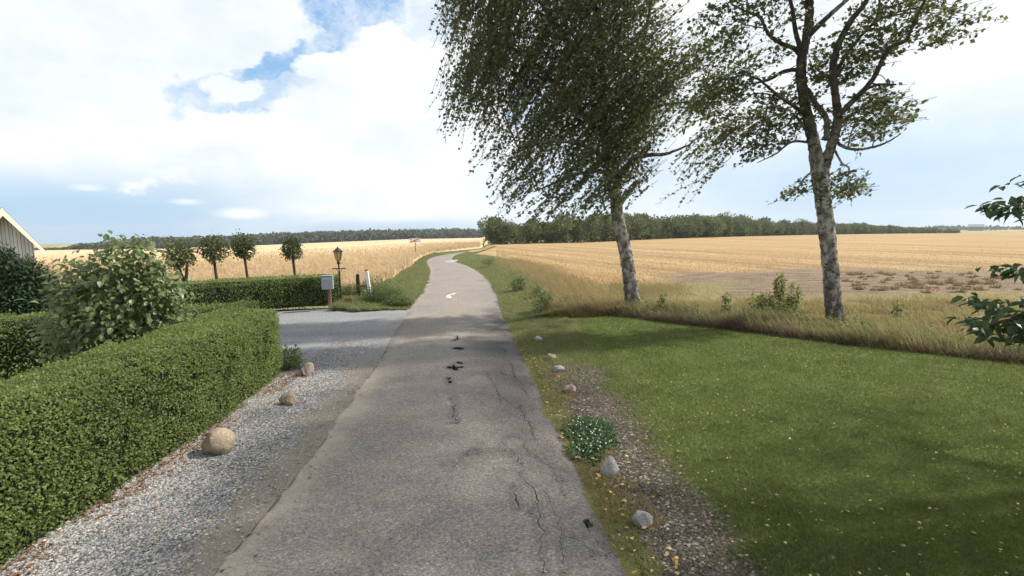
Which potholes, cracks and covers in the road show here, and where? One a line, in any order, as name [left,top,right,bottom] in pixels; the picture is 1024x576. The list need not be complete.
pothole [580,519,594,530]
crack [449,397,459,423]
crack [485,347,606,574]
